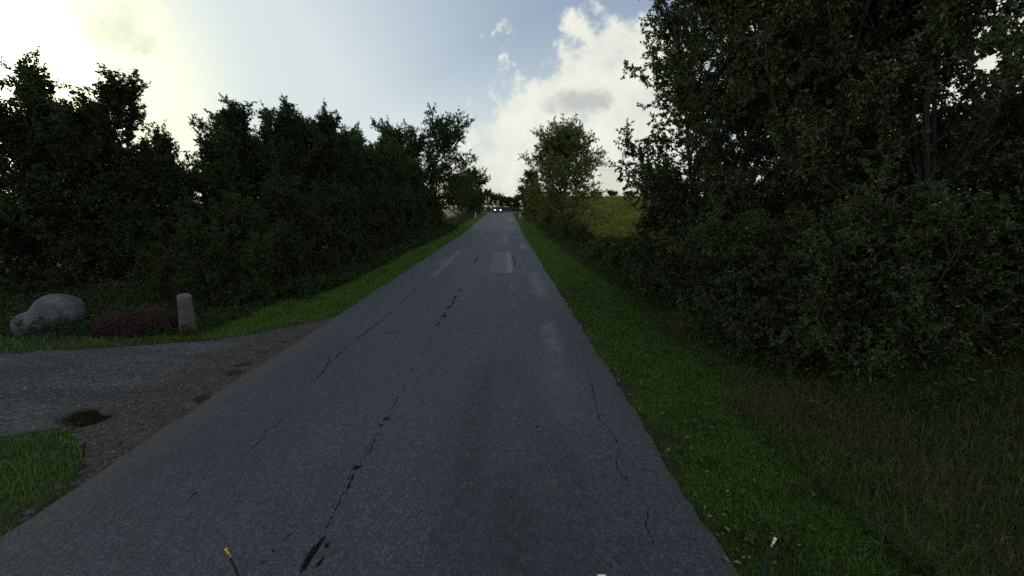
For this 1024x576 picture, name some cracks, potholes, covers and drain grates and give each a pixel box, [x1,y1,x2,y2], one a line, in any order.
crack [325,288,461,529]
crack [588,372,654,543]
pothole [55,407,117,428]
